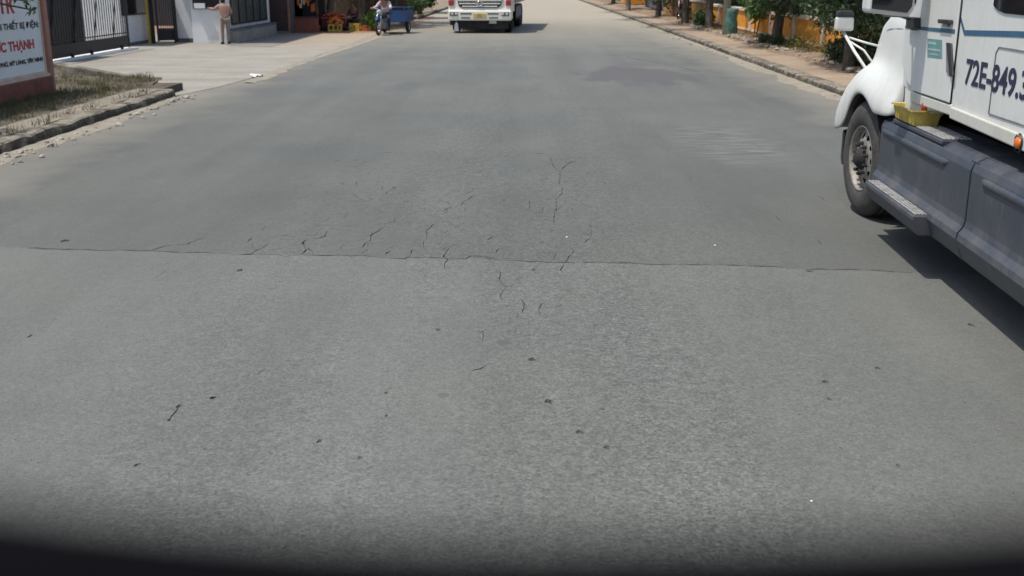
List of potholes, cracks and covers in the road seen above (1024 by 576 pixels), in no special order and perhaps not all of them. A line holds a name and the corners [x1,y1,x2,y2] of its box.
crack [34,152,909,341]
